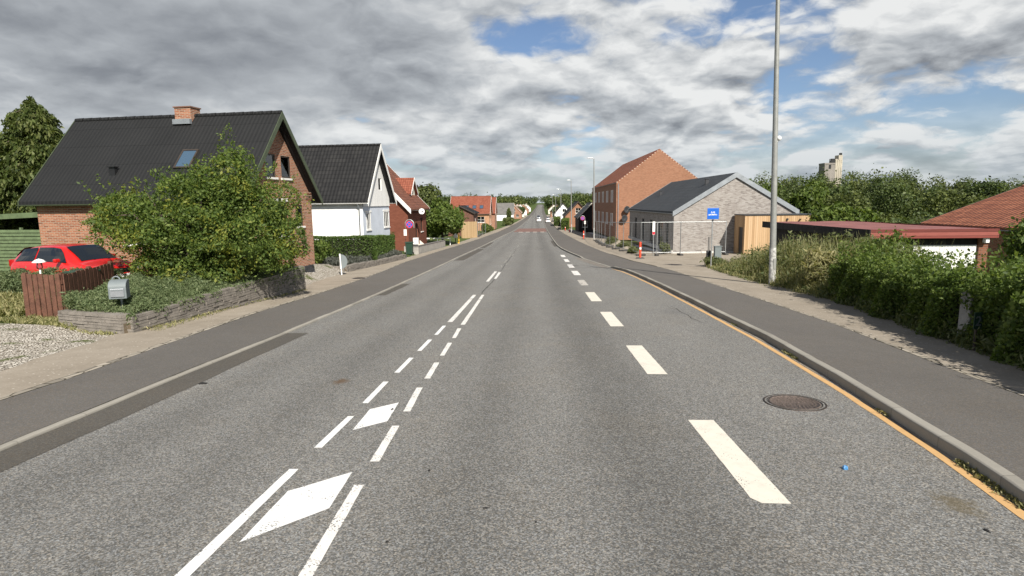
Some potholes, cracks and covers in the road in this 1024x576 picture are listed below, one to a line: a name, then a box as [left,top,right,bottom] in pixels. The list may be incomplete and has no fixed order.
manhole cover [763,394,827,411]
